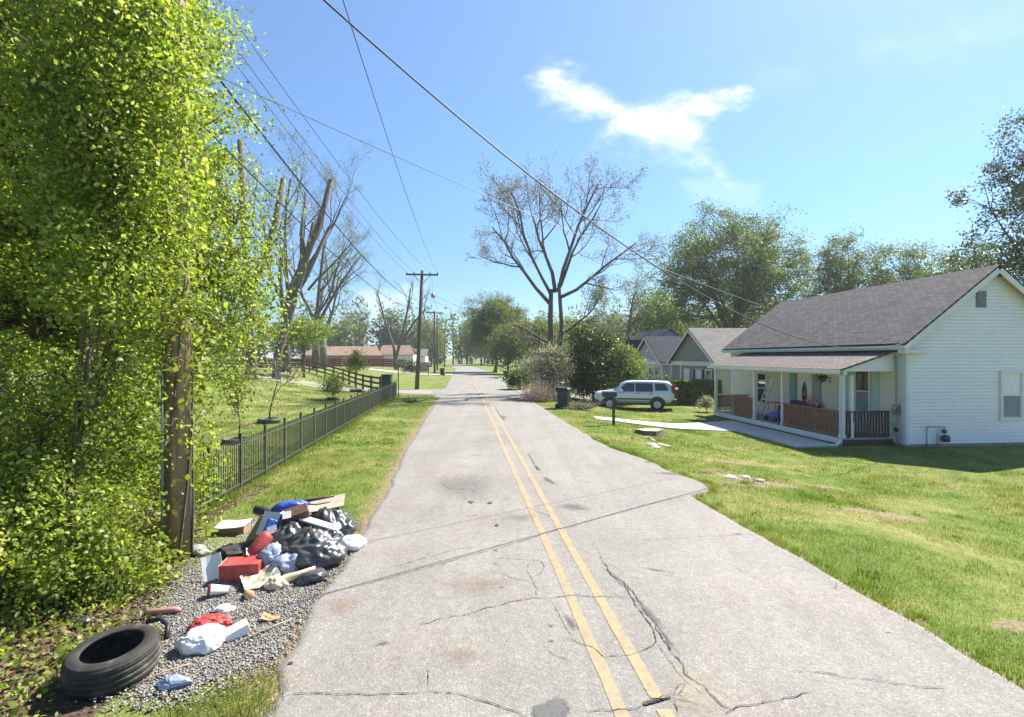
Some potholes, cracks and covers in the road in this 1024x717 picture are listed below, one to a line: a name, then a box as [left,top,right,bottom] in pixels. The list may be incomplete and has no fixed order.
crack [803,671,933,688]
crack [288,674,527,717]
crack [317,496,683,600]
crack [419,543,806,713]
